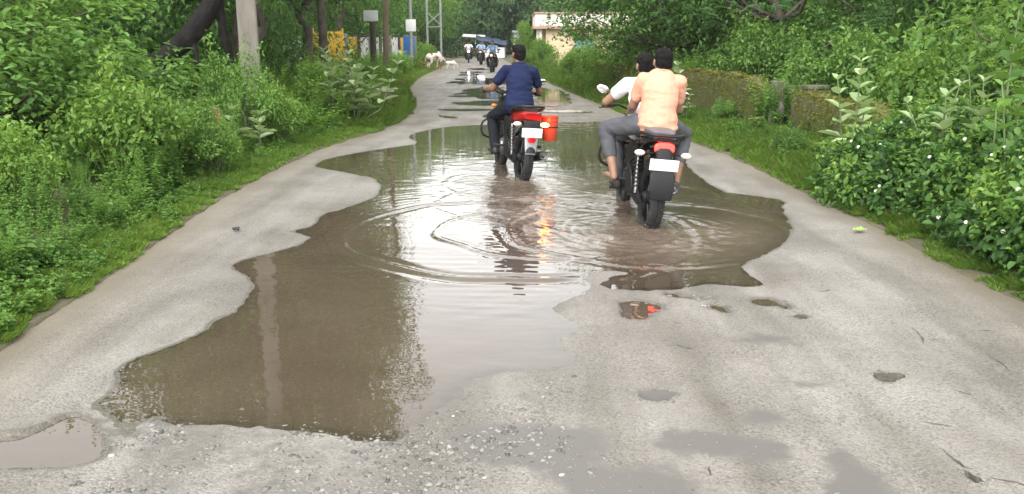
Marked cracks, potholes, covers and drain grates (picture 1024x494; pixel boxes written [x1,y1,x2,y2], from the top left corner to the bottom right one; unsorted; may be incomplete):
pothole [91,121,795,437]
pothole [0,413,113,471]
crack [943,449,972,469]
pothole [873,372,906,382]
